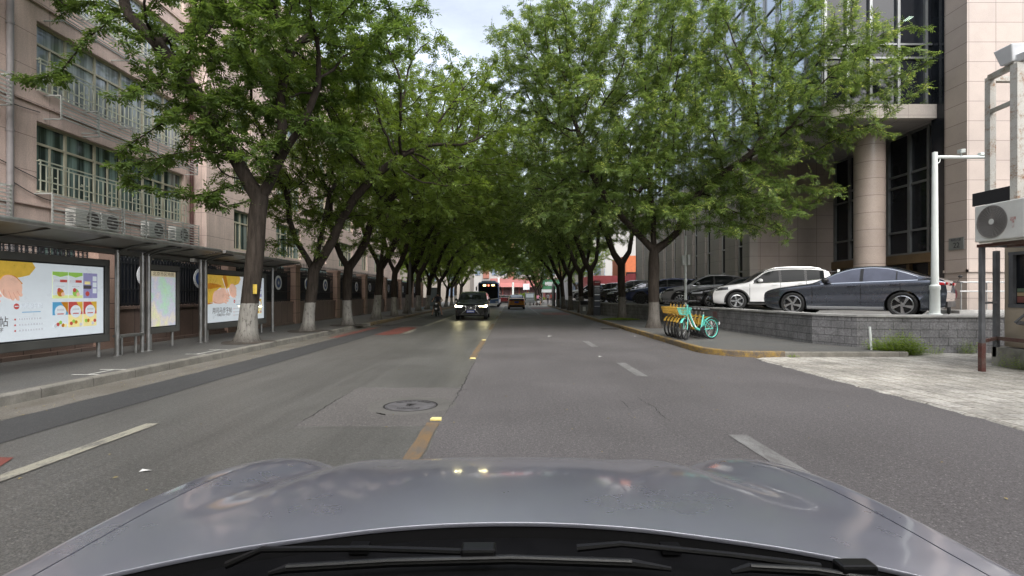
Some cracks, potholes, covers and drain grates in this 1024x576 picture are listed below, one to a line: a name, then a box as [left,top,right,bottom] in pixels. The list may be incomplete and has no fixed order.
manhole cover [368,397,457,415]
